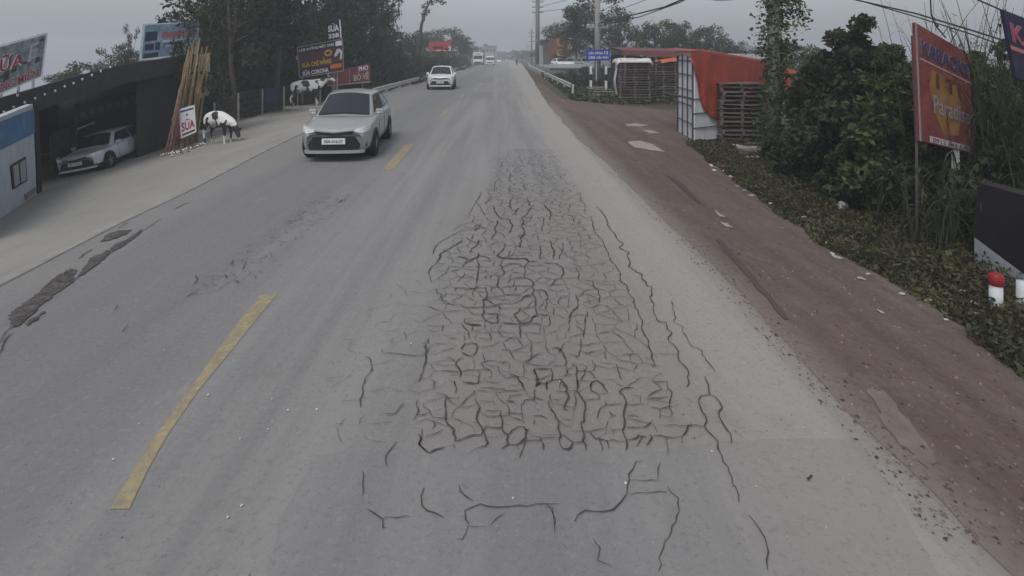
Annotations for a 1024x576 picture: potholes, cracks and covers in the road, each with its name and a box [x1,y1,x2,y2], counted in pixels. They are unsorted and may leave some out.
crack [188,189,350,296]
crack [320,149,769,571]
